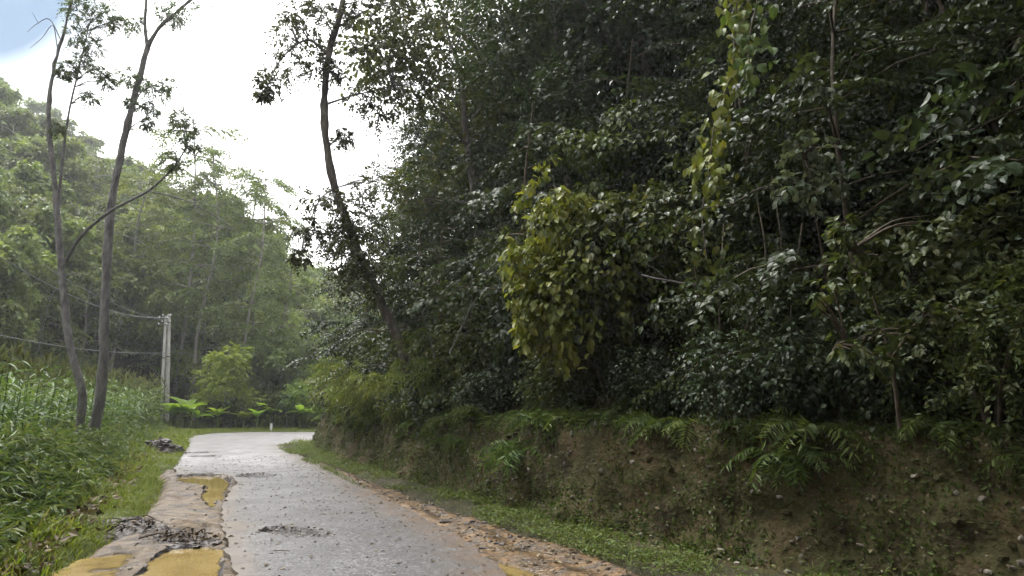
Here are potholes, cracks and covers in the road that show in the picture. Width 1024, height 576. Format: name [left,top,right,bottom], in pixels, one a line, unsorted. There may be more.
pothole [128,544,231,576]
pothole [176,473,233,507]
pothole [255,523,335,539]
